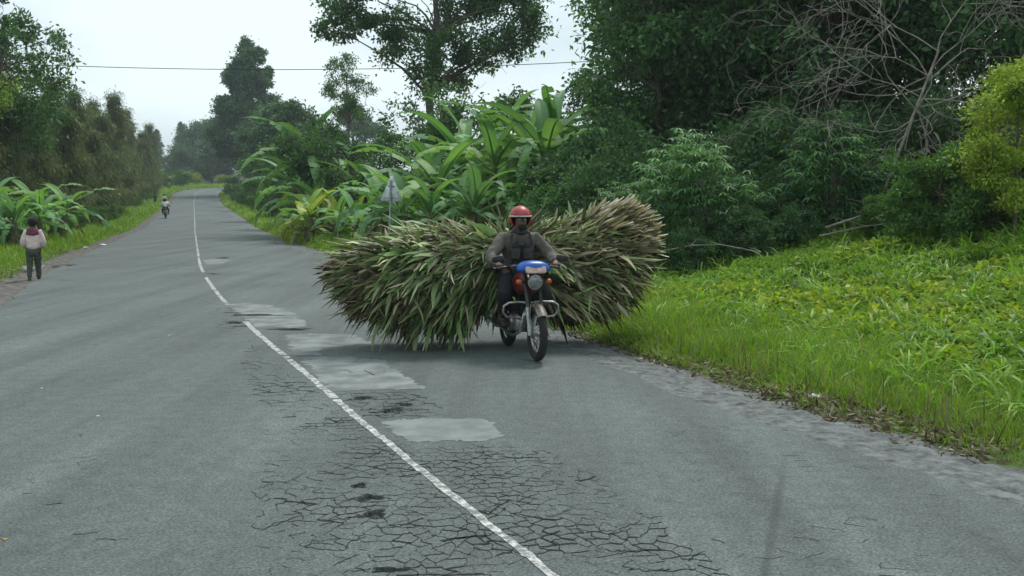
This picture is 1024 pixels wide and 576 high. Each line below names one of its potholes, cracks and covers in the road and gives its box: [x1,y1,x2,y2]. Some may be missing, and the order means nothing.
crack [251,392,730,576]
pothole [357,508,386,519]
